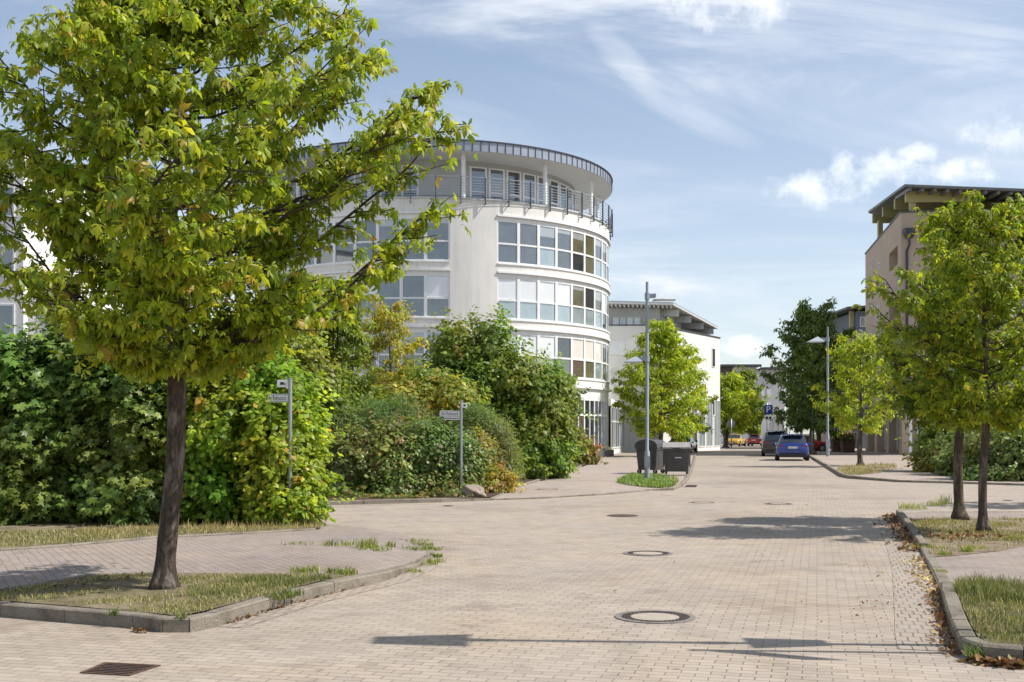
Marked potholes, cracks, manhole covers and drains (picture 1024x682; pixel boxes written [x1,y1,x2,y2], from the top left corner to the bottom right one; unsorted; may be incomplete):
drain grate [80,662,161,676]
manhole cover [615,610,696,624]
